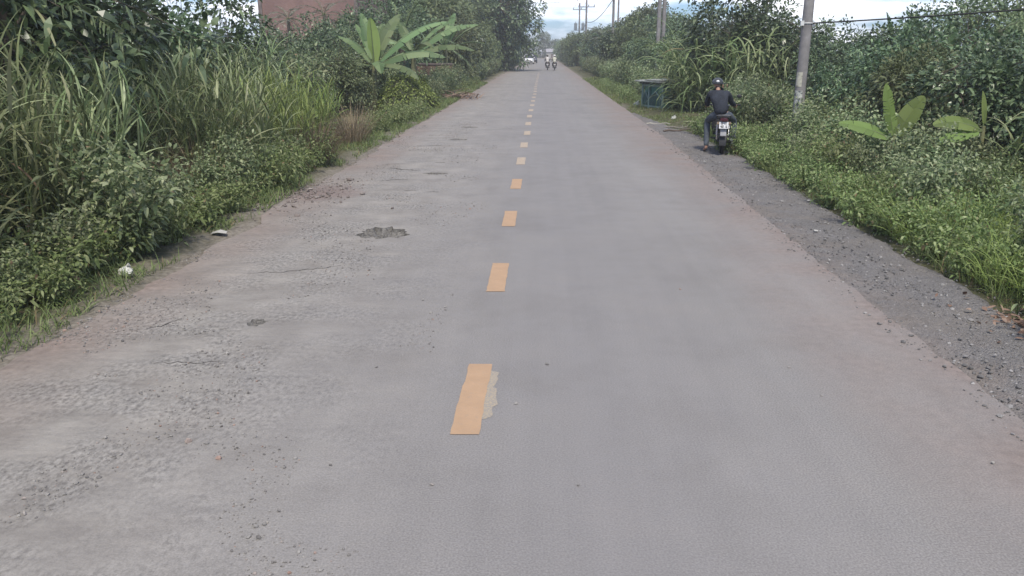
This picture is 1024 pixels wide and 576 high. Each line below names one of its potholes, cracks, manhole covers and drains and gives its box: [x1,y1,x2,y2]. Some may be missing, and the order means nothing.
pothole [355,226,410,239]
